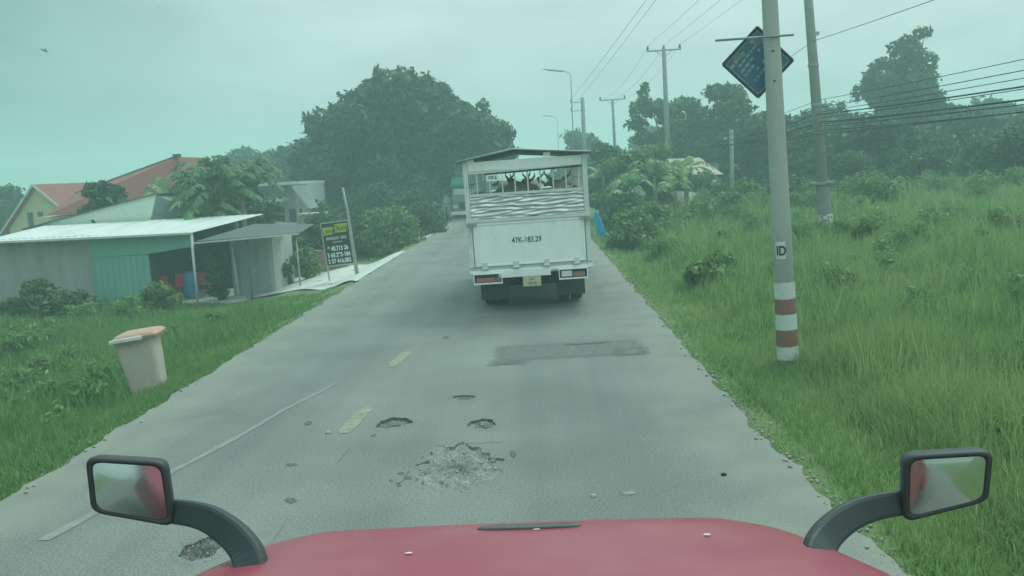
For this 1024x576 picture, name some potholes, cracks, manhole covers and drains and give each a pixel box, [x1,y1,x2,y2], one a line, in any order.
pothole [461,417,502,431]
pothole [370,416,419,431]
pothole [408,440,512,493]
pothole [447,394,481,402]
pothole [168,534,225,566]
